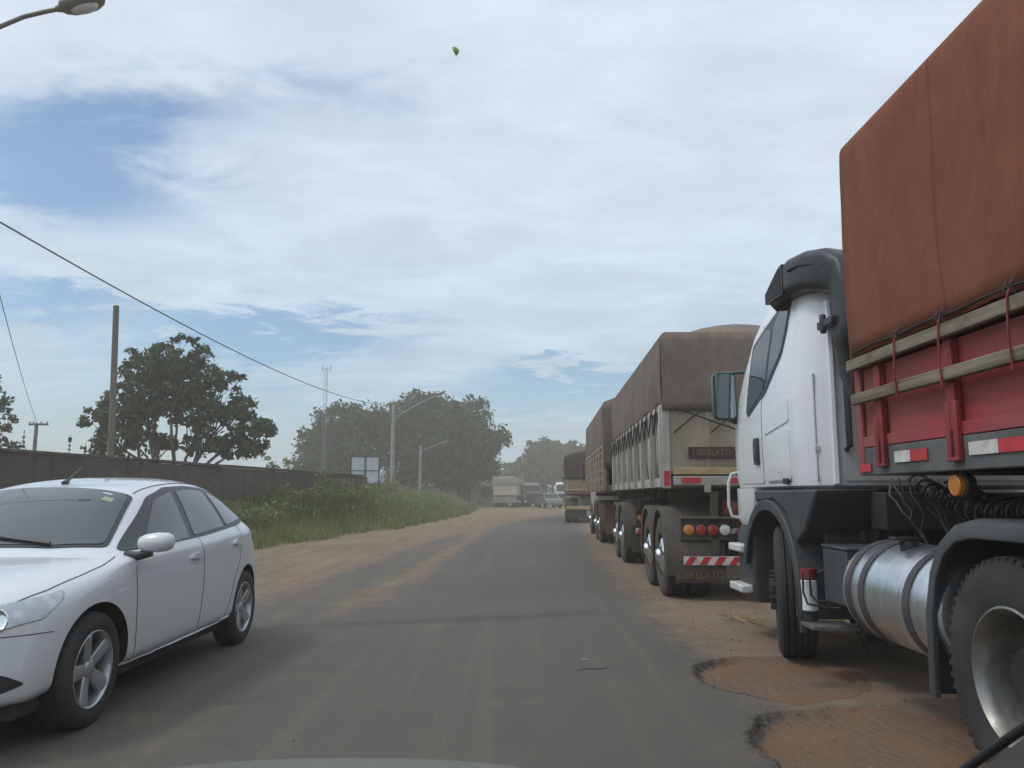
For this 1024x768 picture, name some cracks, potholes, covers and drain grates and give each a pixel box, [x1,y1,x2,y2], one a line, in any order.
pothole [689,656,874,705]
pothole [739,706,986,768]
